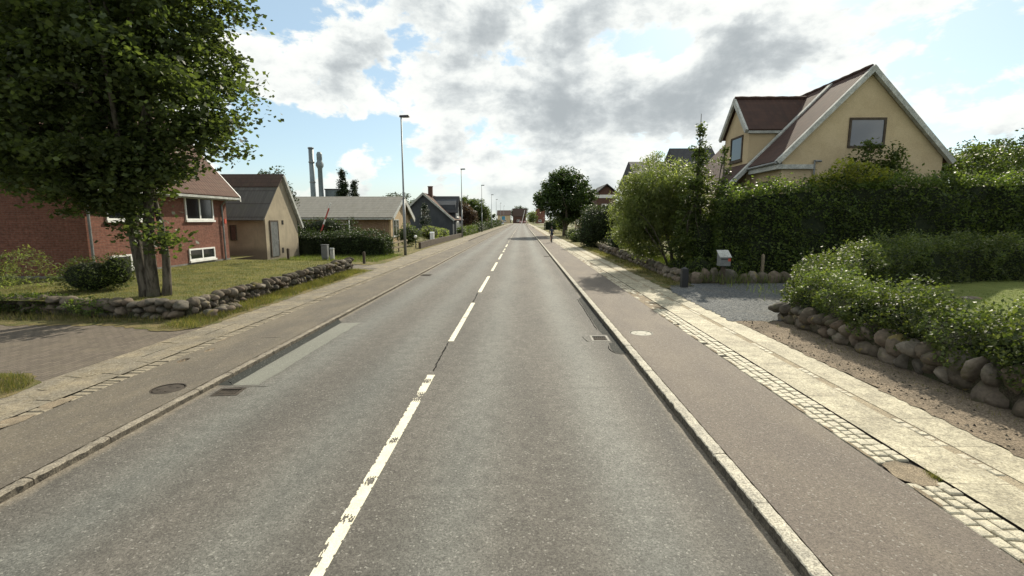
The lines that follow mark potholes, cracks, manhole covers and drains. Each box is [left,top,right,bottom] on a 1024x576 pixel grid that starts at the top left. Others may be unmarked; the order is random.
drain grate [210,388,246,396]
manhole cover [149,383,187,394]
